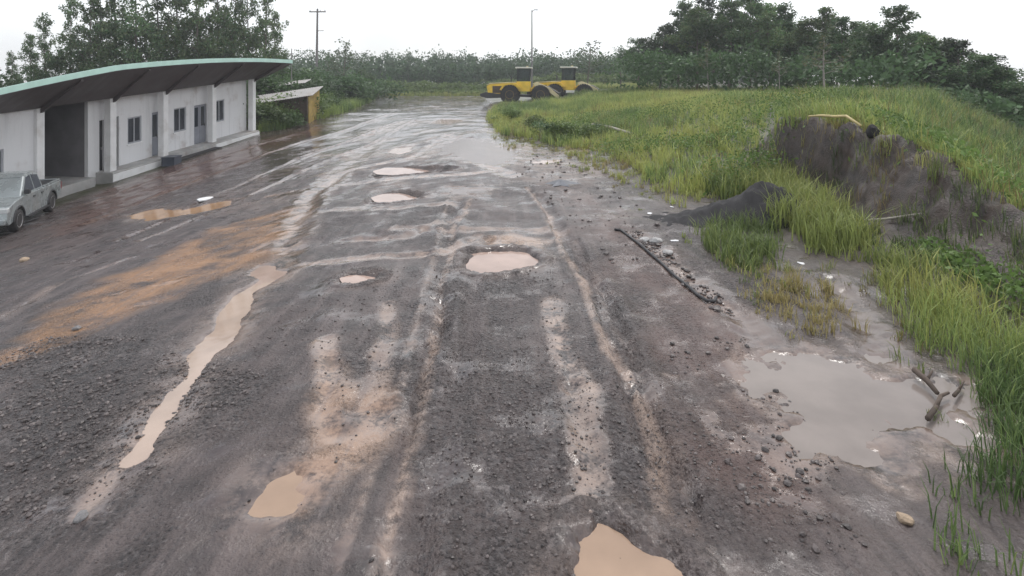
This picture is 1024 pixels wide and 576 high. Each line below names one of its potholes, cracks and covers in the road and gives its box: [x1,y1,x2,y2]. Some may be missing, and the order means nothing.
pothole [327,265,394,288]
pothole [364,189,432,204]
pothole [367,164,464,178]
pothole [453,243,554,277]
pothole [539,495,729,576]
